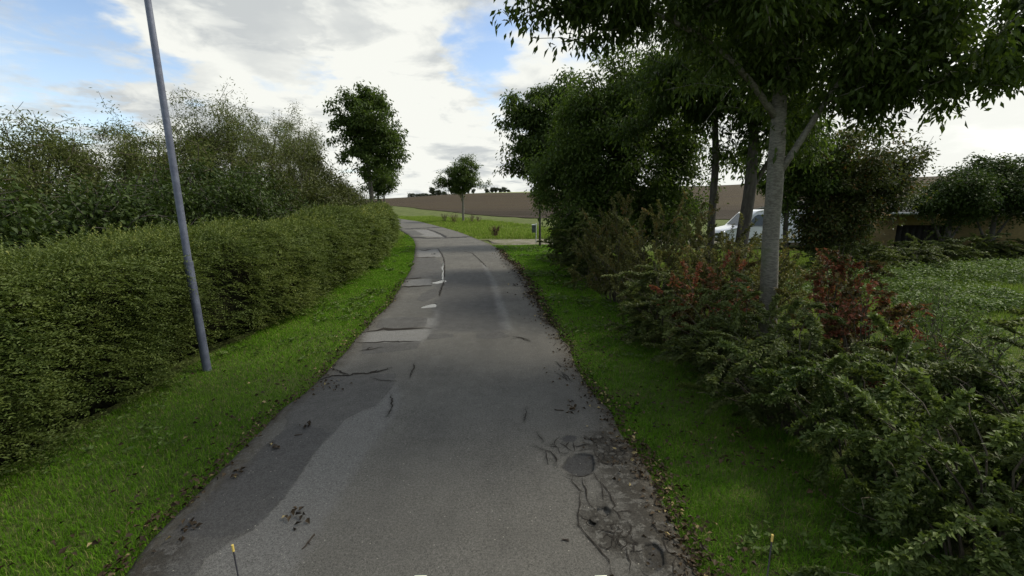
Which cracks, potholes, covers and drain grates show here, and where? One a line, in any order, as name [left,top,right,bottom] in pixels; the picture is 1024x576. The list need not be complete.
pothole [635,536,674,576]
pothole [553,449,602,481]
crack [315,367,393,416]
crack [524,408,631,465]
crack [568,473,678,575]
